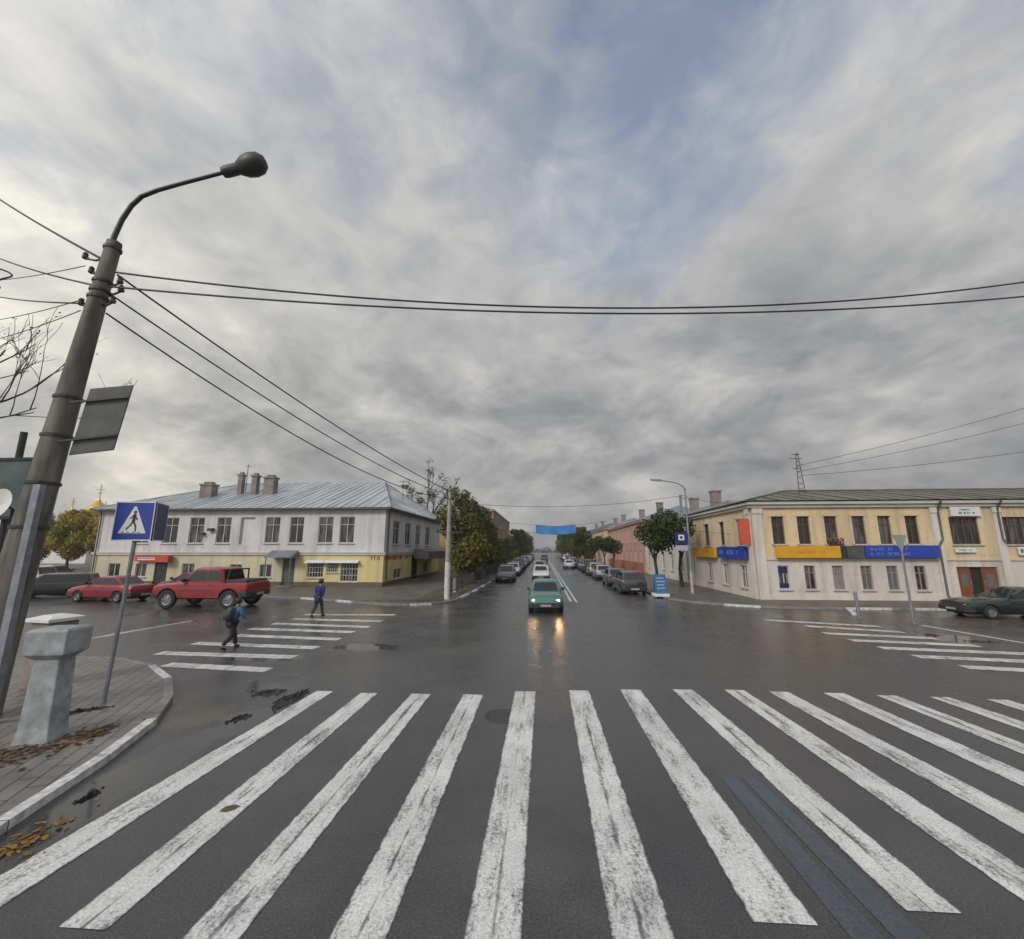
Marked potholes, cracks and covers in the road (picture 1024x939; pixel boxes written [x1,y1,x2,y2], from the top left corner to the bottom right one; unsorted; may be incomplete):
pothole [270,687,311,713]
pothole [251,689,287,697]
manhole cover [484,709,511,724]
pothole [224,713,252,724]
pothole [72,786,104,805]
